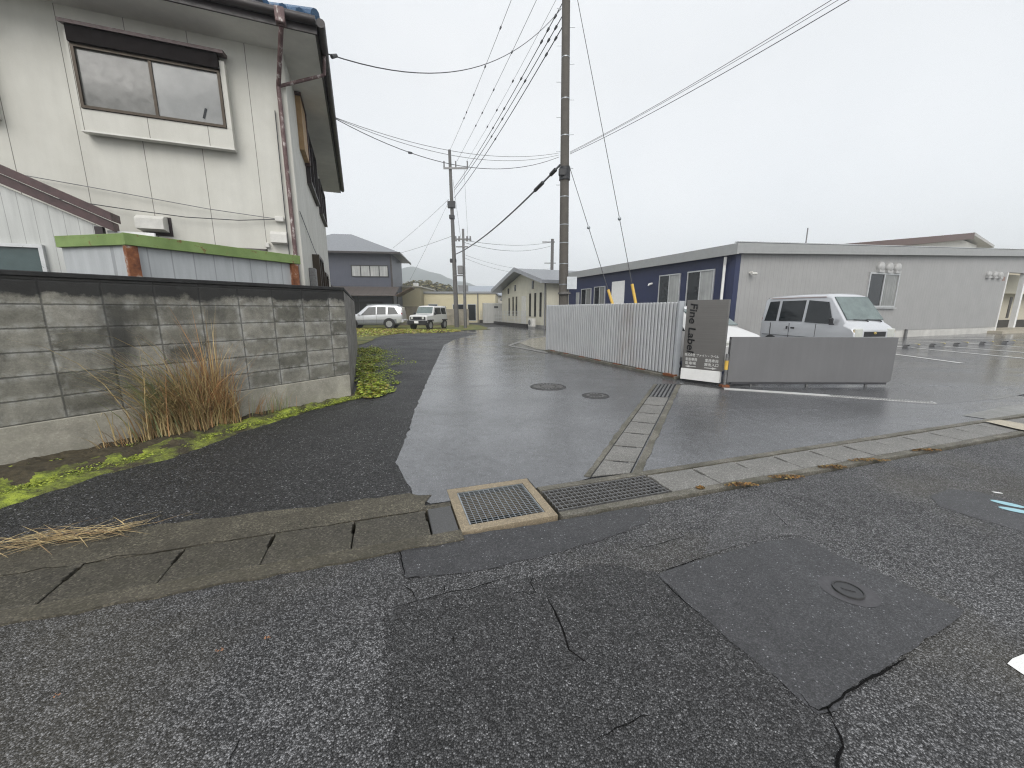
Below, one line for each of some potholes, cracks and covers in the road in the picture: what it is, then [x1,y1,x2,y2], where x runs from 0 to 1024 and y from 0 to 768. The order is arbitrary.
drain grate [542,475,669,512]
manhole cover [817,576,881,607]
crack [801,658,906,768]
crack [391,574,586,662]
crack [600,715,648,737]
drain grate [650,384,674,397]
drain grate [447,478,558,535]
